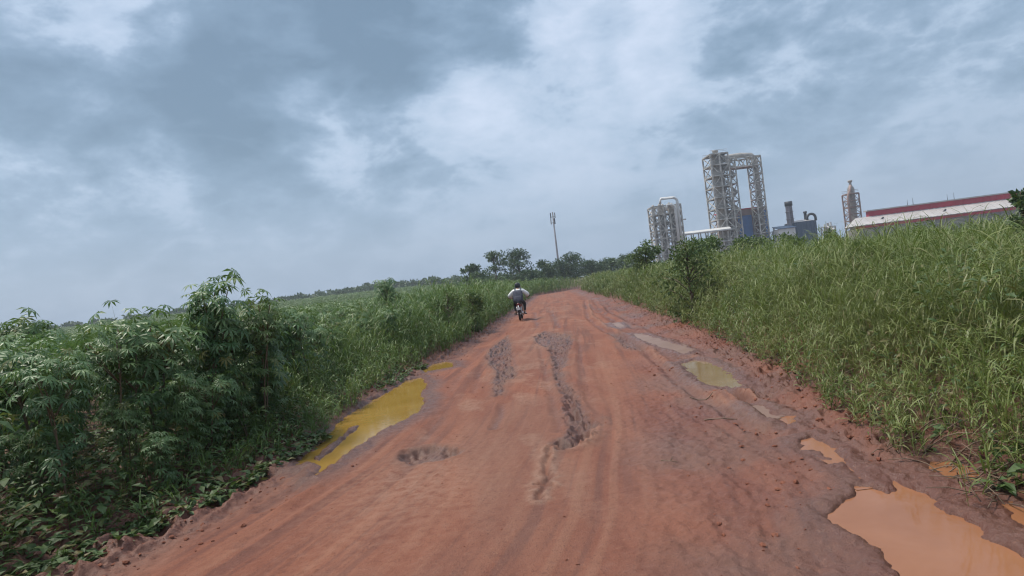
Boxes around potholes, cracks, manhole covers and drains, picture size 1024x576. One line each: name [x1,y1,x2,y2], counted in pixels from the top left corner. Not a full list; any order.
pothole [778,429,871,490]
pothole [483,335,523,398]
pothole [737,400,790,421]
pothole [531,330,609,452]
pothole [627,332,698,356]
pothole [277,375,436,483]
pothole [670,356,760,393]
pothole [799,463,1024,576]
pothole [762,408,816,430]
pothole [392,443,469,466]
